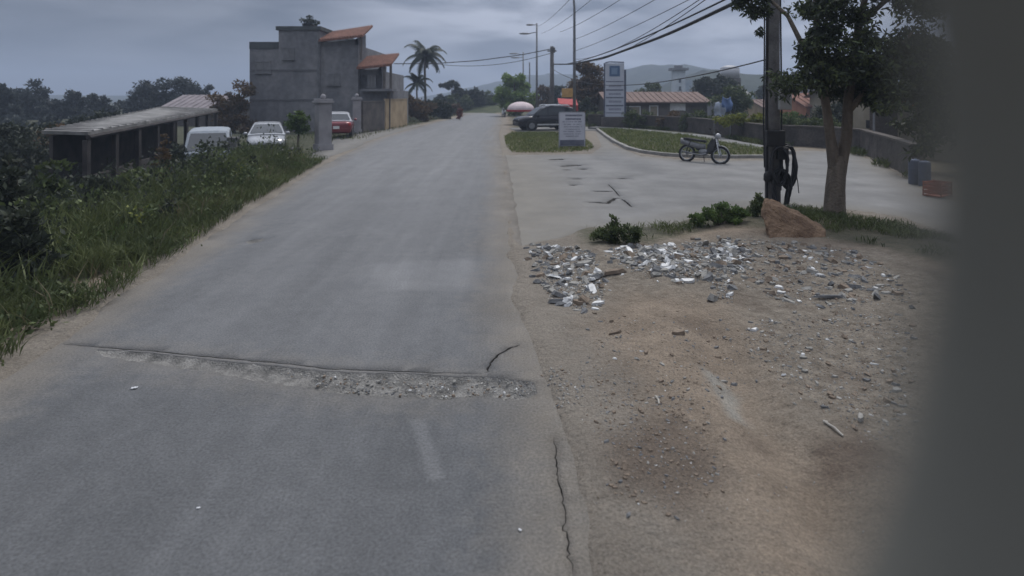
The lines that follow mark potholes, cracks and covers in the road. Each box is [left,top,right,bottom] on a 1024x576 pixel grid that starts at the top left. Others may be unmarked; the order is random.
crack [550,159,632,207]
crack [77,345,519,374]
pothole [96,350,538,401]
crack [553,440,574,576]
